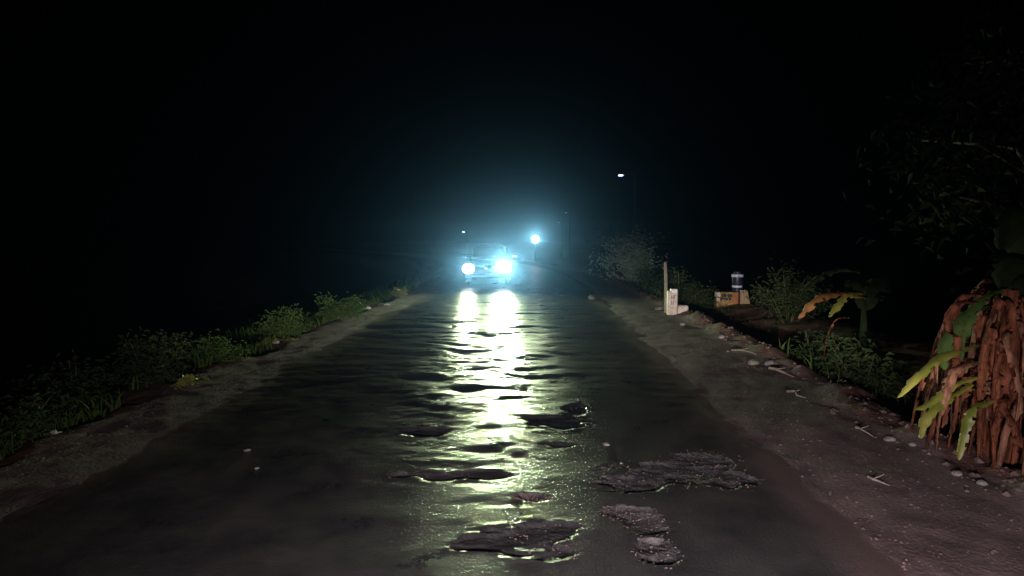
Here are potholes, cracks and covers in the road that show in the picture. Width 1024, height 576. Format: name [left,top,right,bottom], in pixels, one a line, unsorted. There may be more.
pothole [587,452,766,494]
pothole [514,492,550,503]
pothole [387,468,516,483]
pothole [449,518,593,563]
pothole [598,504,682,566]
pothole [392,425,453,438]
pothole [520,402,592,430]
pothole [547,441,576,449]
